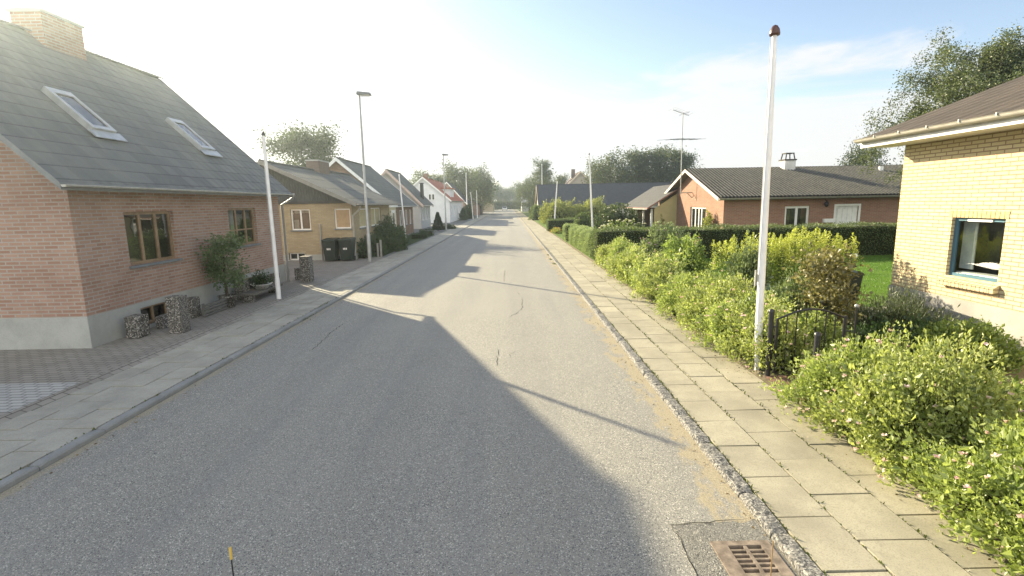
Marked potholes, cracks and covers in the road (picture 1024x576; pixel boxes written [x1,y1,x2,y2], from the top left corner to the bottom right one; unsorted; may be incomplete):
drain grate [710,540,795,576]
